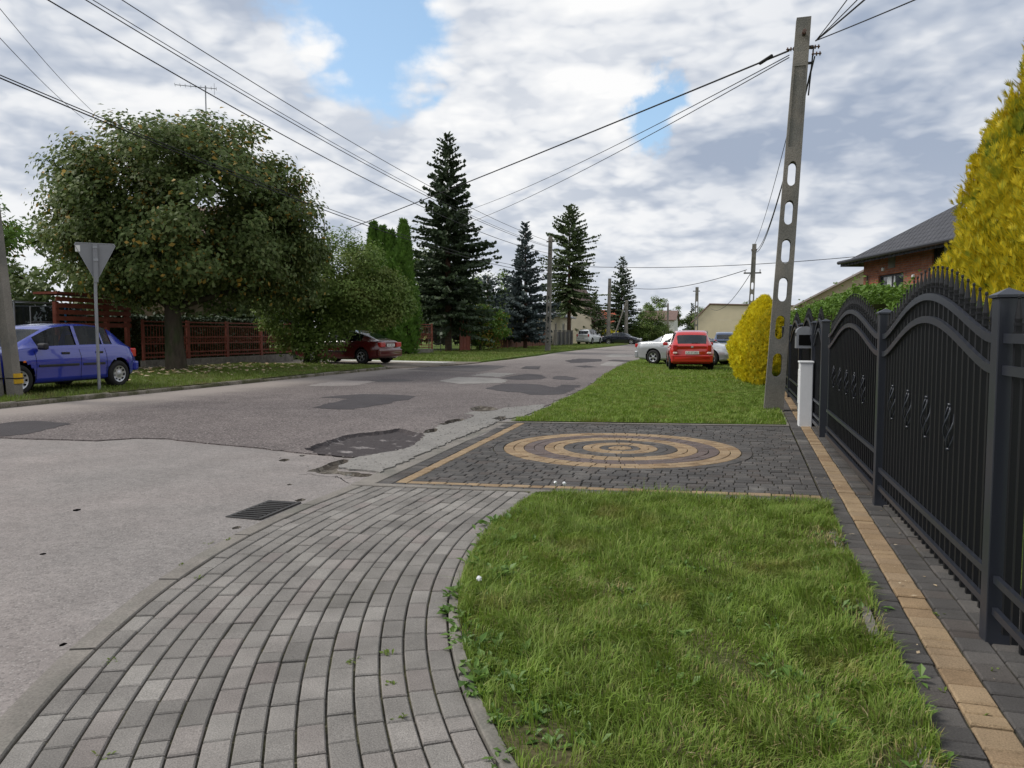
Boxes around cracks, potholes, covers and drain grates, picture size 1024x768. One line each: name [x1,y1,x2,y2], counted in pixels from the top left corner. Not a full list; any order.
pothole [308,459,373,477]
pothole [305,428,424,458]
drain grate [225,500,301,520]
